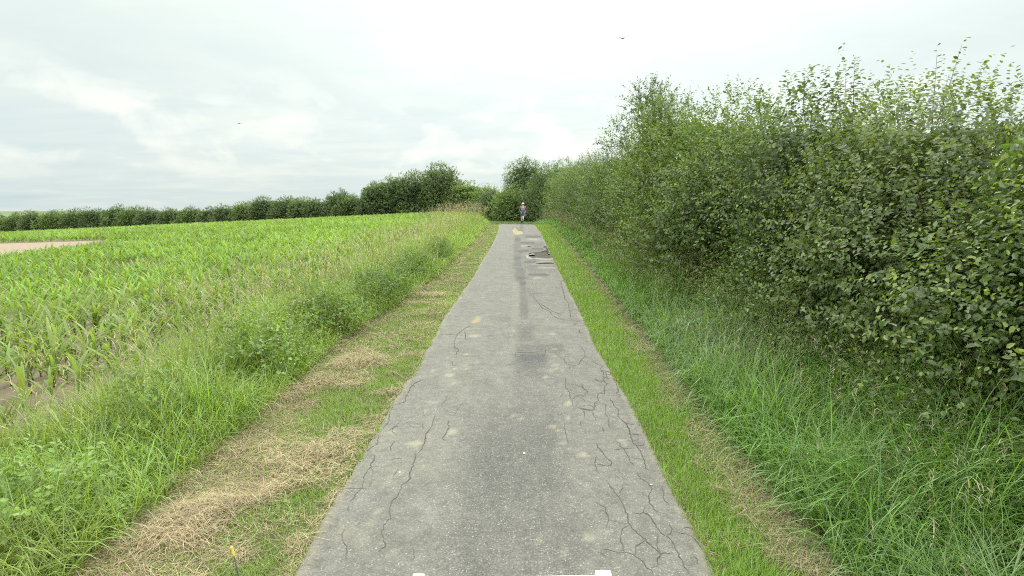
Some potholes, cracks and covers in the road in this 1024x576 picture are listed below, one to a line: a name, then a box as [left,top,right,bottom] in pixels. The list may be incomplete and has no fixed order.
pothole [524,250,553,260]
crack [543,350,702,572]
crack [342,380,462,551]
